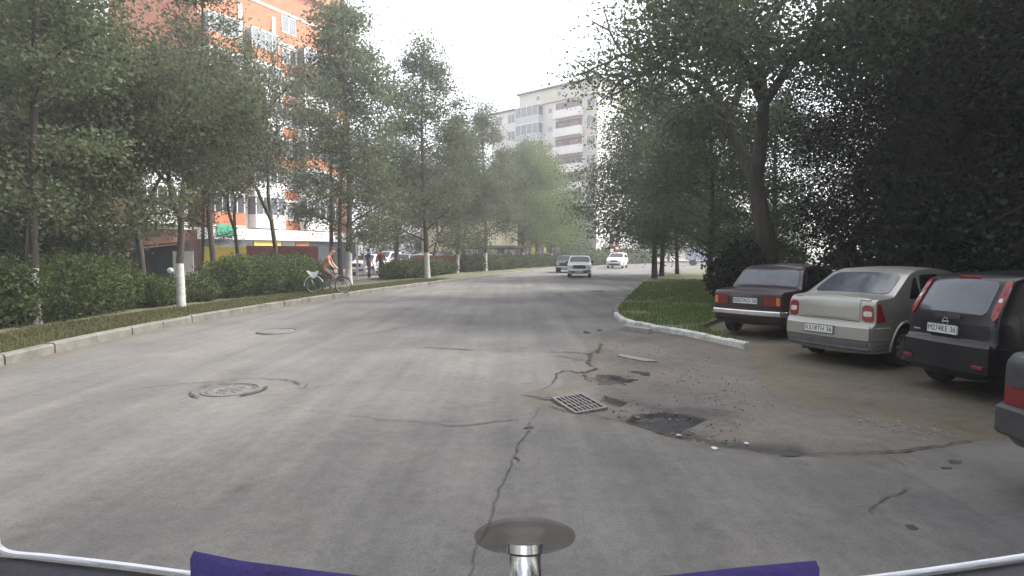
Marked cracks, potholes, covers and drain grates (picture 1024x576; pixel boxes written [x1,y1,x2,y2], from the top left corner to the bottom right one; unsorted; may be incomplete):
crack [290,320,690,576]
pothole [627,411,708,436]
manhole cover [200,383,260,397]
crack [843,487,908,511]
drain grate [551,393,608,414]
pothole [600,395,629,407]
pothole [594,374,638,385]
